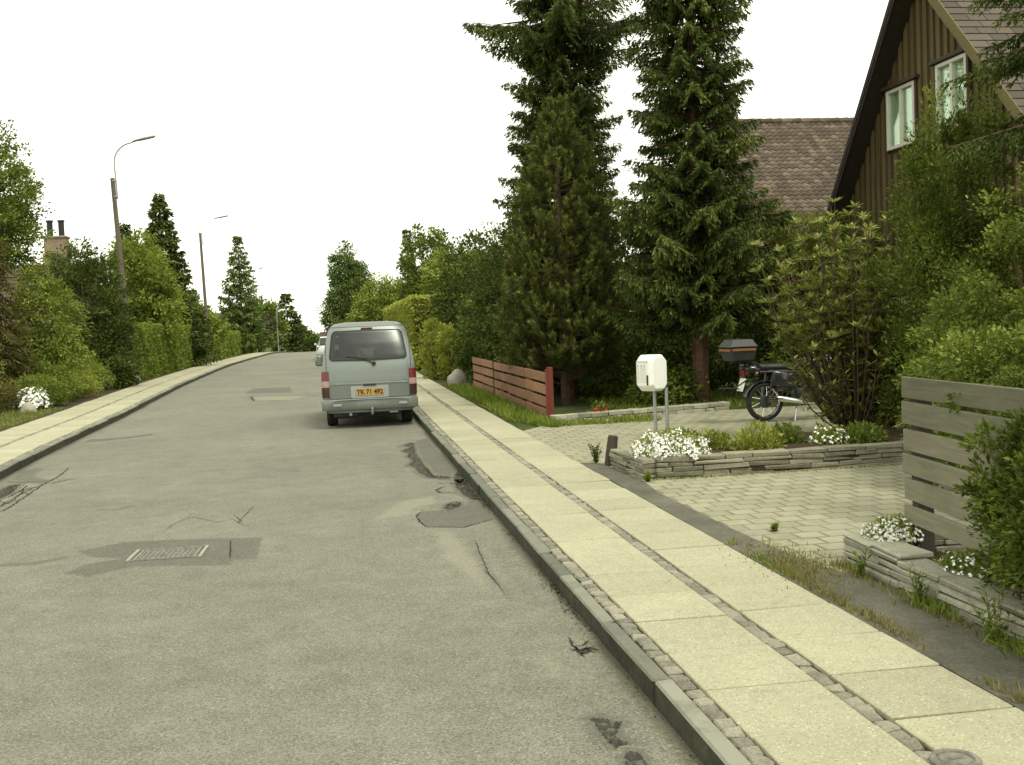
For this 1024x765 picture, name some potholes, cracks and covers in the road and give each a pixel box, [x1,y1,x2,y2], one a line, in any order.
manhole cover [929,748,982,765]
crack [0,470,76,511]
crack [568,637,600,657]
crack [416,510,501,588]
crack [165,506,254,558]
pothole [575,710,646,754]
